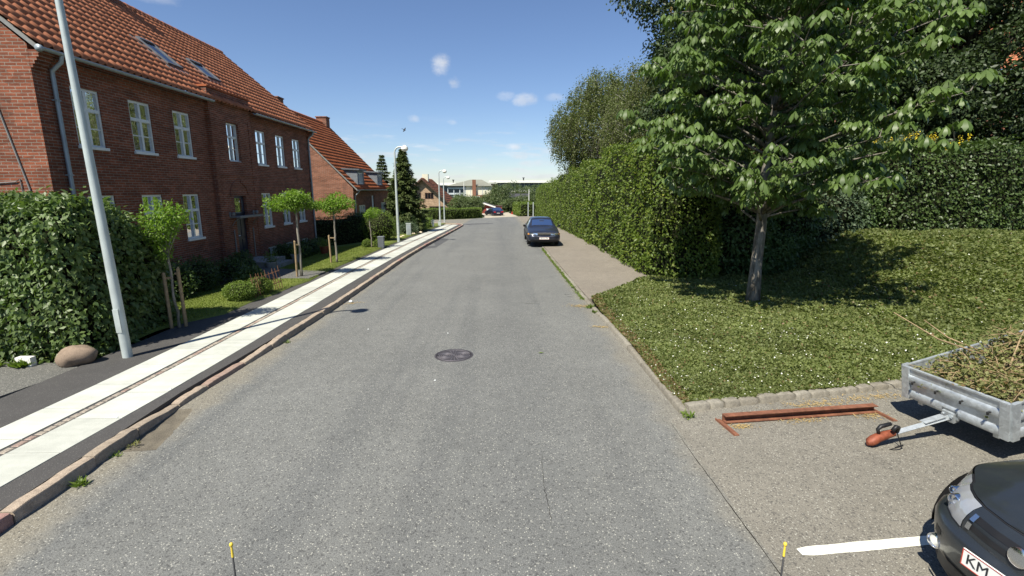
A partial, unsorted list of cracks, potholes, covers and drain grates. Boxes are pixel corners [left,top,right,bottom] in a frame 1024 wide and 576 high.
manhole cover [434,349,473,362]
